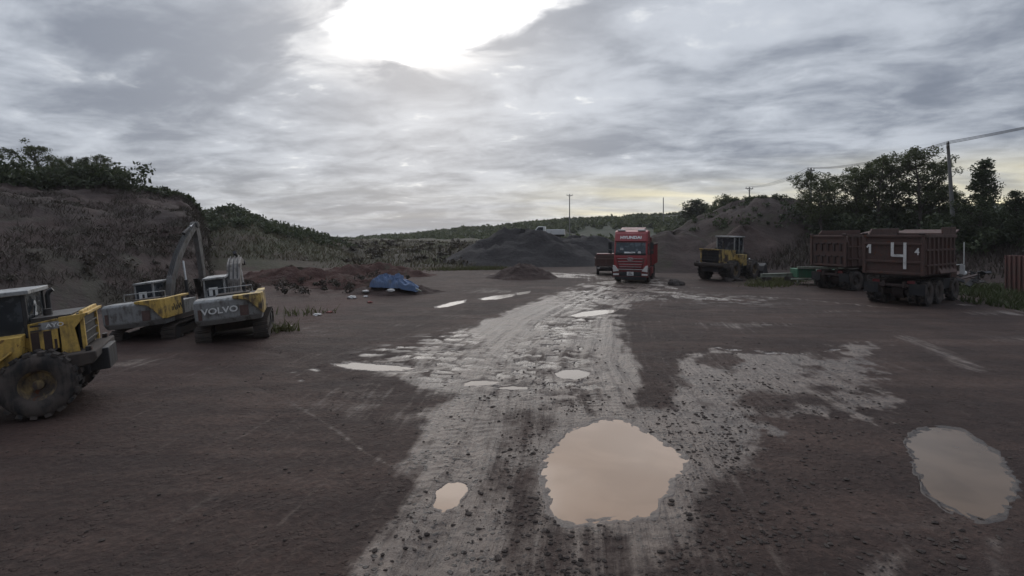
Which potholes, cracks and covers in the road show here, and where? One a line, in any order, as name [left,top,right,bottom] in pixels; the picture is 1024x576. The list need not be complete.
pothole [903,425,1022,524]
pothole [537,416,693,529]
pothole [552,368,593,380]
pothole [431,479,472,513]
pothole [568,309,619,317]
